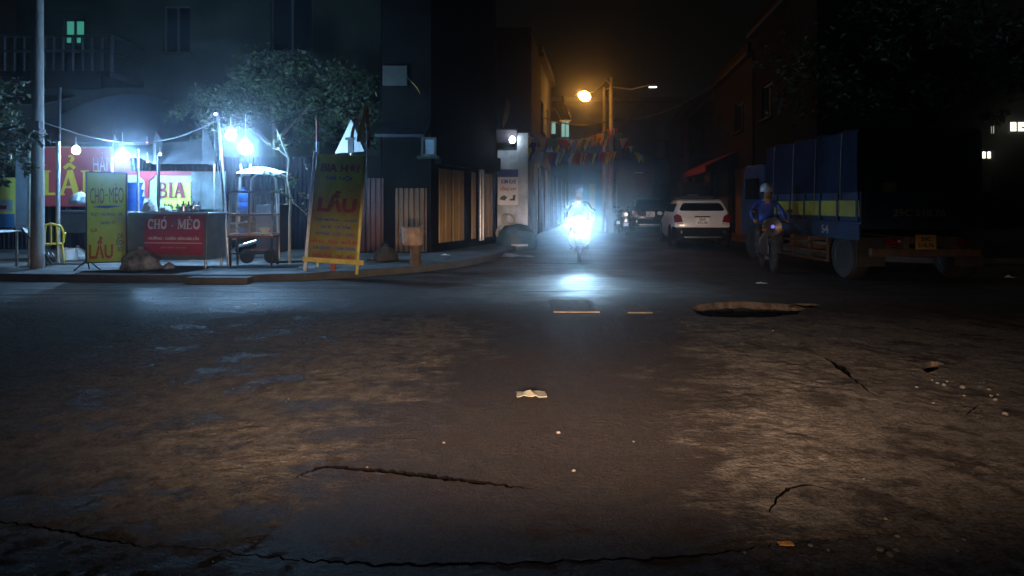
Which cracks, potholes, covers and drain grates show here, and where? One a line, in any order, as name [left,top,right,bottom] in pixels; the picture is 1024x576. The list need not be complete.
crack [295,465,535,490]
pothole [691,301,805,318]
crack [0,521,895,567]
crack [815,353,877,397]
pothole [921,362,944,373]
crack [769,484,848,513]
